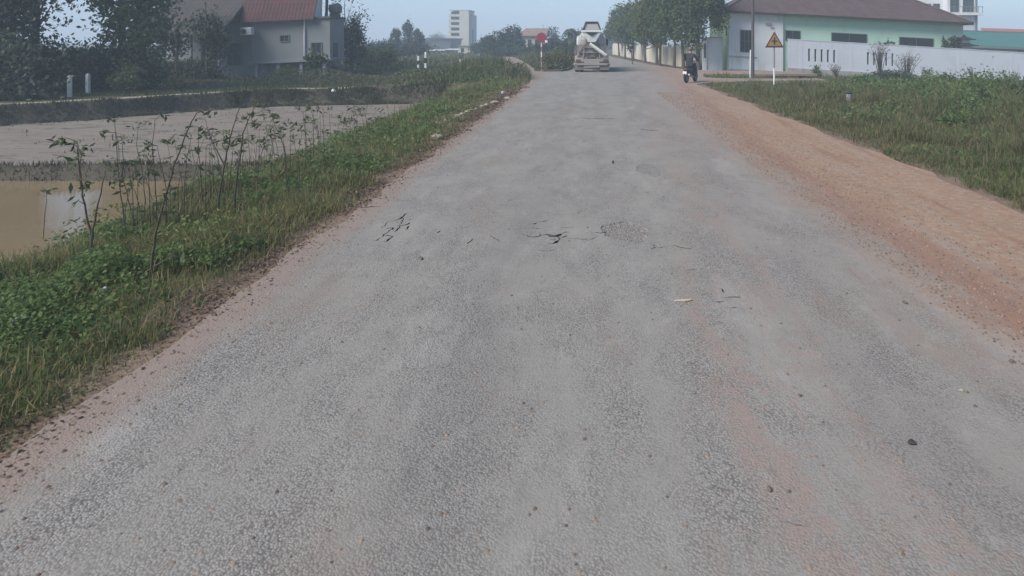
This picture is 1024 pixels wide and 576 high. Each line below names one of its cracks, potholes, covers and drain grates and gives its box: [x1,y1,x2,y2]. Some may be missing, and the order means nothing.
crack [364,206,412,242]
crack [519,221,606,251]
pothole [601,221,648,244]
